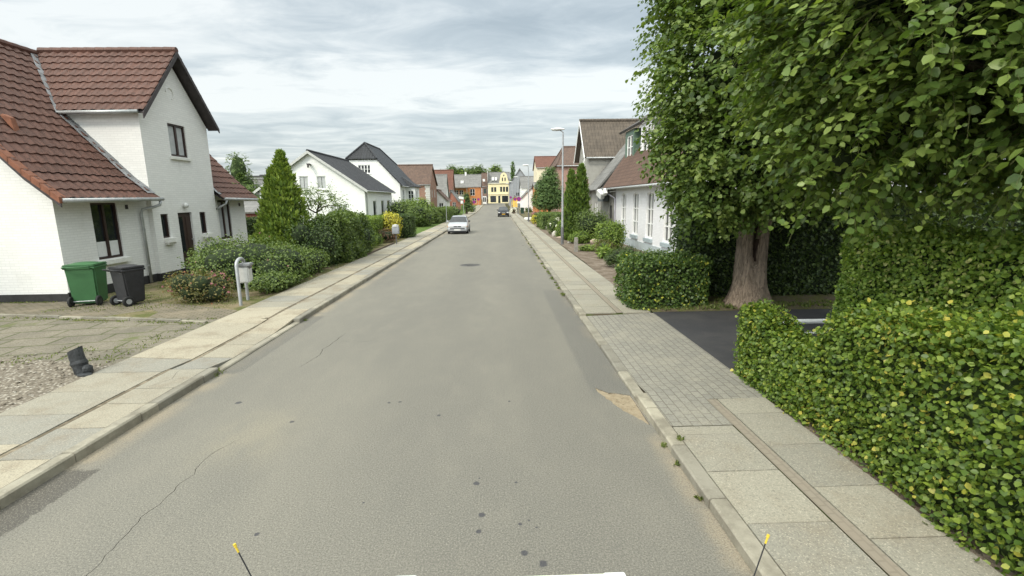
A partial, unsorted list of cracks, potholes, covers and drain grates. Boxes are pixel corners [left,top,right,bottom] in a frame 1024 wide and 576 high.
crack [86,438,241,576]
pothole [595,388,651,426]
